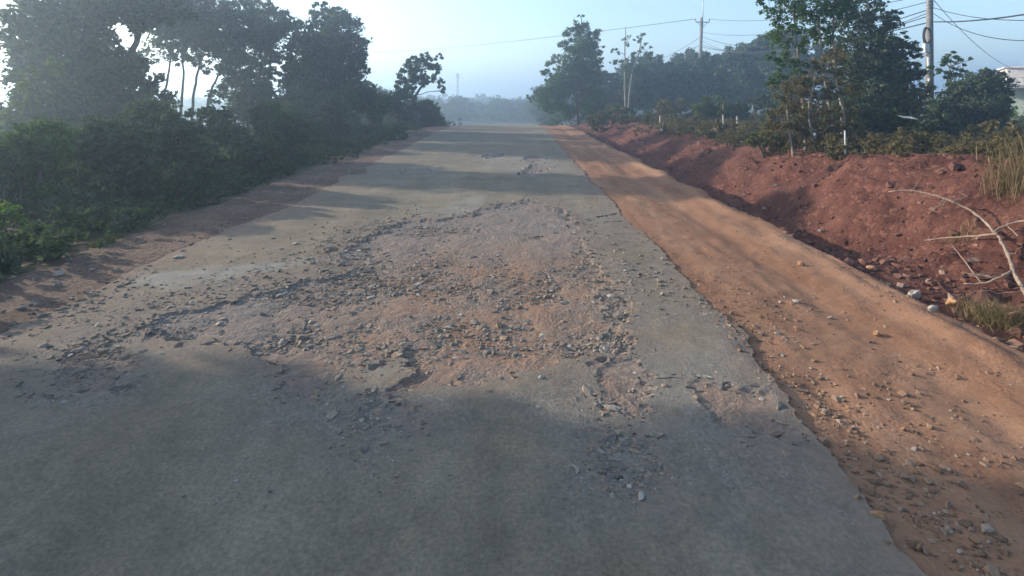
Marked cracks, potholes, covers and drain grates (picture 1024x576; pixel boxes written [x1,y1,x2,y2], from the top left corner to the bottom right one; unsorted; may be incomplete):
pothole [275,372,328,399]
pothole [345,387,434,439]
pothole [586,355,662,420]
pothole [517,162,552,178]
pothole [135,199,638,393]
pothole [49,342,144,396]
